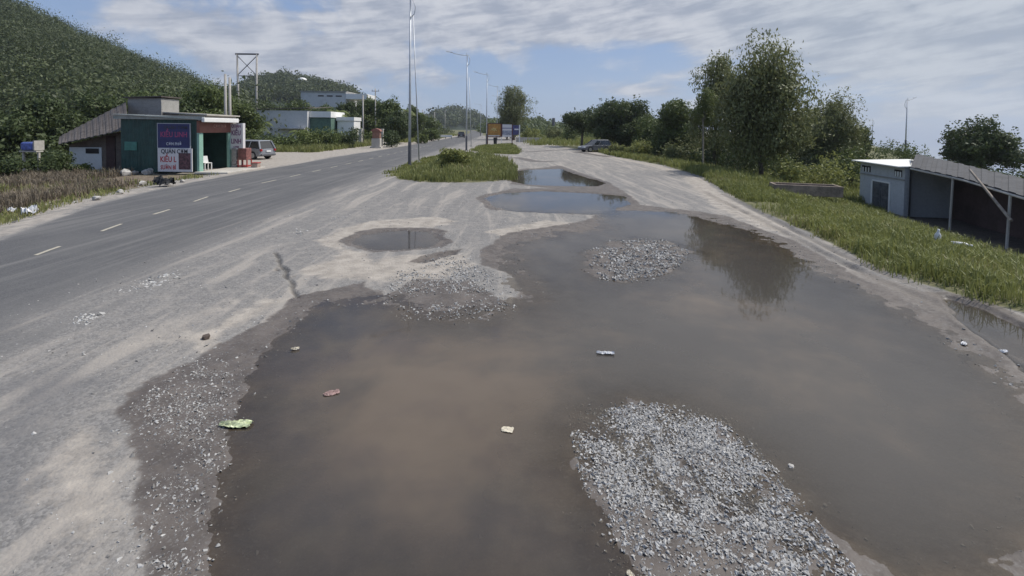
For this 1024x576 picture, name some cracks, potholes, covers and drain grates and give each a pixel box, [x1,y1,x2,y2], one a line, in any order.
crack [271,252,301,299]
pothole [508,168,607,186]
pothole [152,209,1024,576]
pothole [478,190,635,215]
